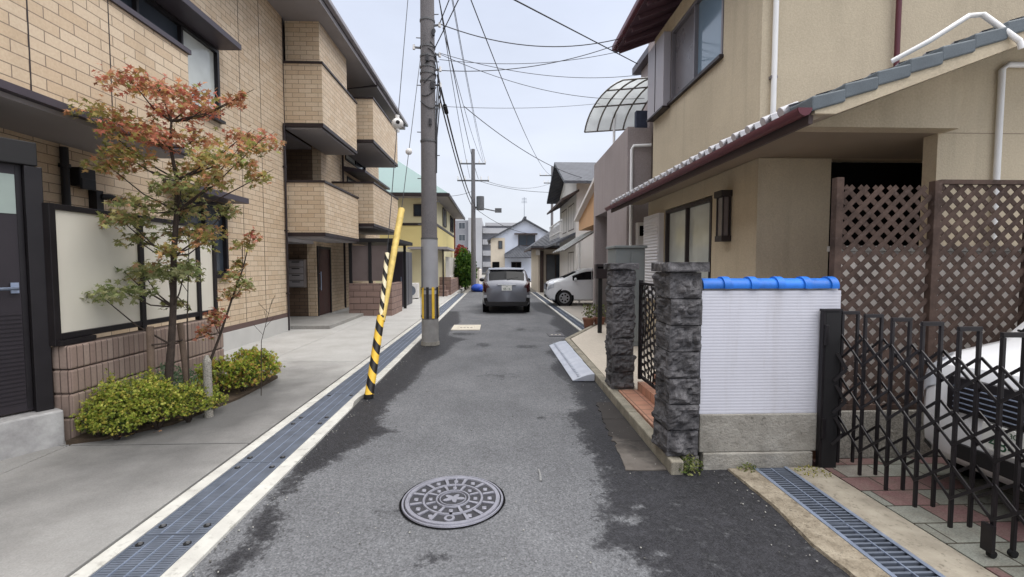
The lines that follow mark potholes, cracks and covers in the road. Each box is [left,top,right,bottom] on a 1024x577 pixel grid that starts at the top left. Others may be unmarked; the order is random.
drain grate [758,468,863,524]
manhole cover [399,475,505,529]
drain grate [238,420,328,463]
drain grate [329,374,368,394]
drain grate [293,393,357,421]
drain grate [144,462,283,535]
drain grate [379,349,404,360]
drain grate [830,523,940,577]
drain grate [90,534,205,577]
drain grate [354,360,392,374]
